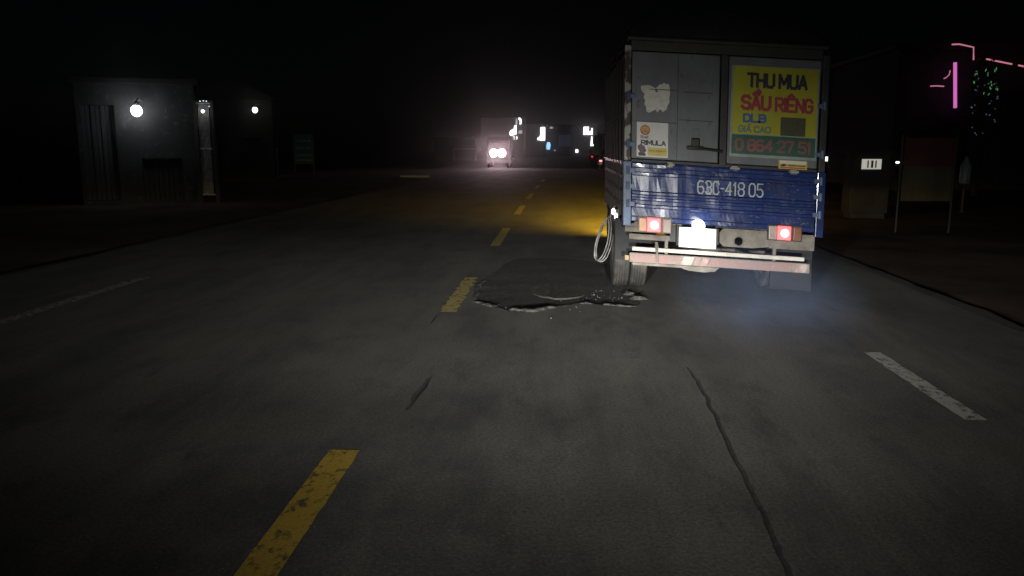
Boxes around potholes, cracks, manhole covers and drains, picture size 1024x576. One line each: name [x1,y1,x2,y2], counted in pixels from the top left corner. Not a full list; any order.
pothole [472,257,644,312]
crack [406,376,431,410]
crack [687,367,793,576]
